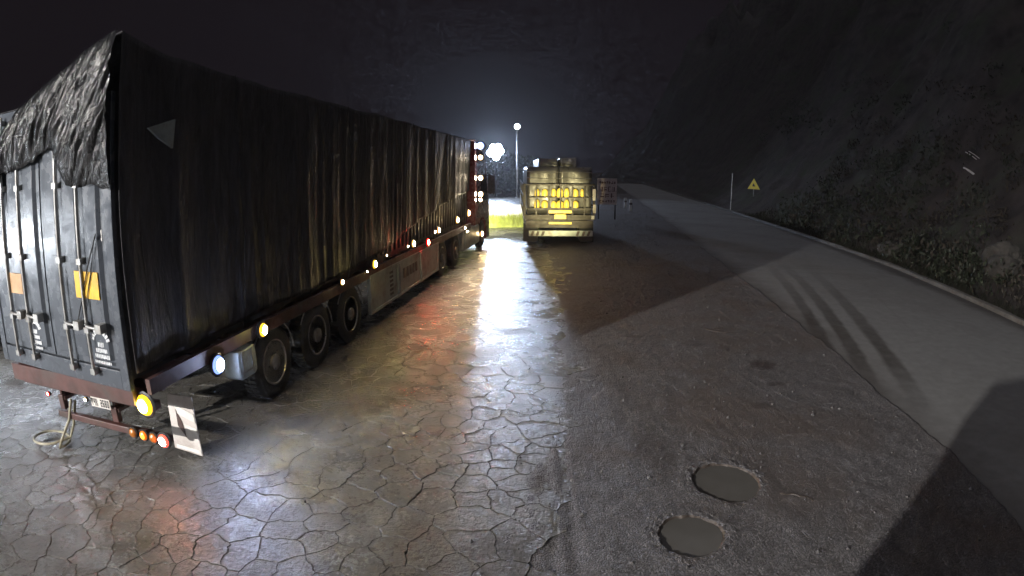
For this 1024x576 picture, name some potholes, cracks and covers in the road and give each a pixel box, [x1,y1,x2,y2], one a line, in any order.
pothole [684,458,771,508]
pothole [648,509,739,564]
